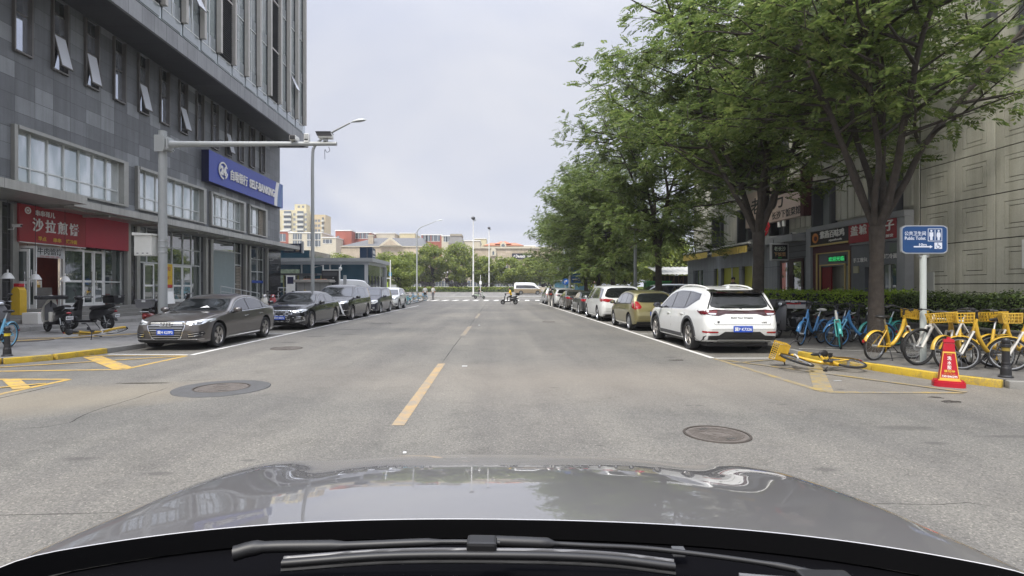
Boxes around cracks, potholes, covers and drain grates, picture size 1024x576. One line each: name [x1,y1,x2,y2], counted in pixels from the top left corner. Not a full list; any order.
manhole cover [683,425,753,444]
manhole cover [170,380,271,398]
